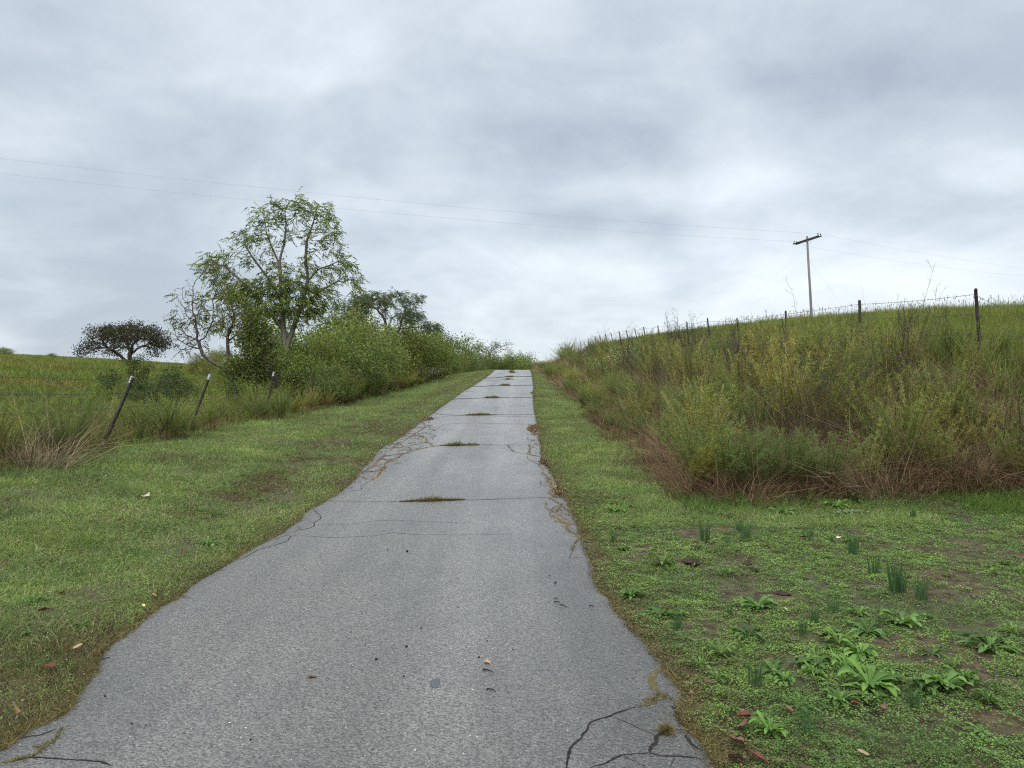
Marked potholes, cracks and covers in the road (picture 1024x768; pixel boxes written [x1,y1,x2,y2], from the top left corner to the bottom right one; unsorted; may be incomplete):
crack [245,510,487,557]
crack [2,724,111,766]
crack [507,434,585,558]
crack [566,666,705,768]
crack [354,416,534,491]
